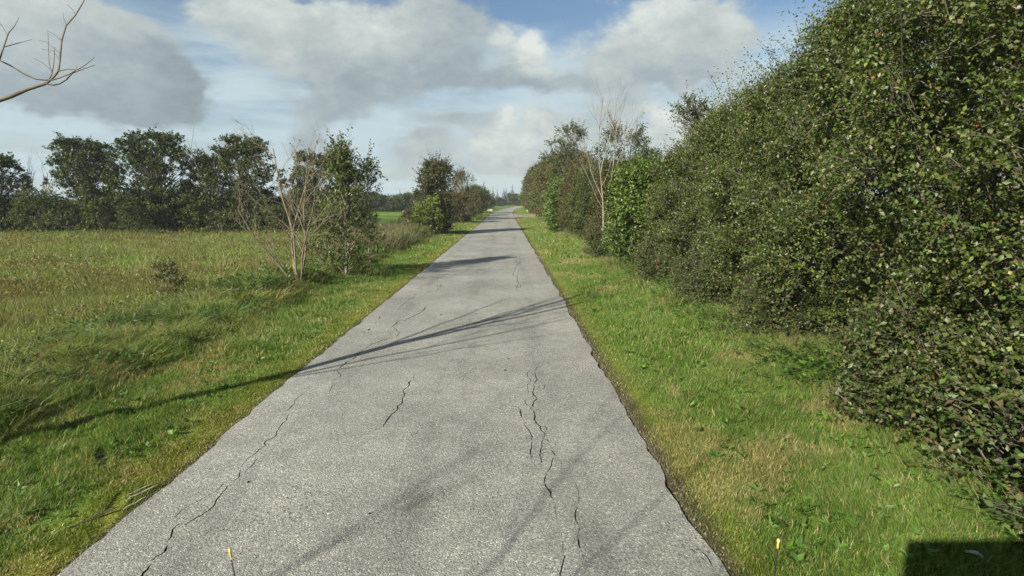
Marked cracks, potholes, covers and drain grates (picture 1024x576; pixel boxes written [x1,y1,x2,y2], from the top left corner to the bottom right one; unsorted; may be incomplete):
crack [514,366,584,576]
crack [141,397,298,576]
crack [329,288,440,392]
crack [375,378,418,437]
